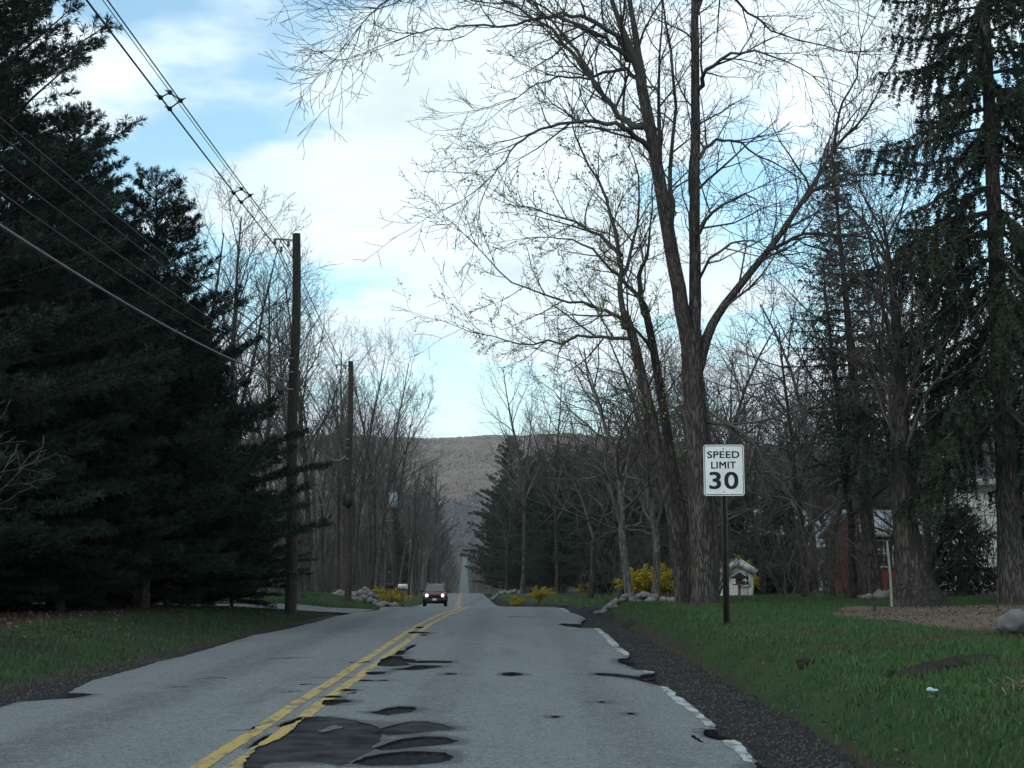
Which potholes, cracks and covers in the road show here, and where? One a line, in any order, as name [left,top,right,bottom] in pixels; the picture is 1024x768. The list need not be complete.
pothole [377,656,453,666]
pothole [350,751,454,766]
pothole [374,736,458,750]
pothole [370,706,417,715]
pothole [379,721,455,735]
pothole [595,673,658,685]
pothole [243,716,382,768]
